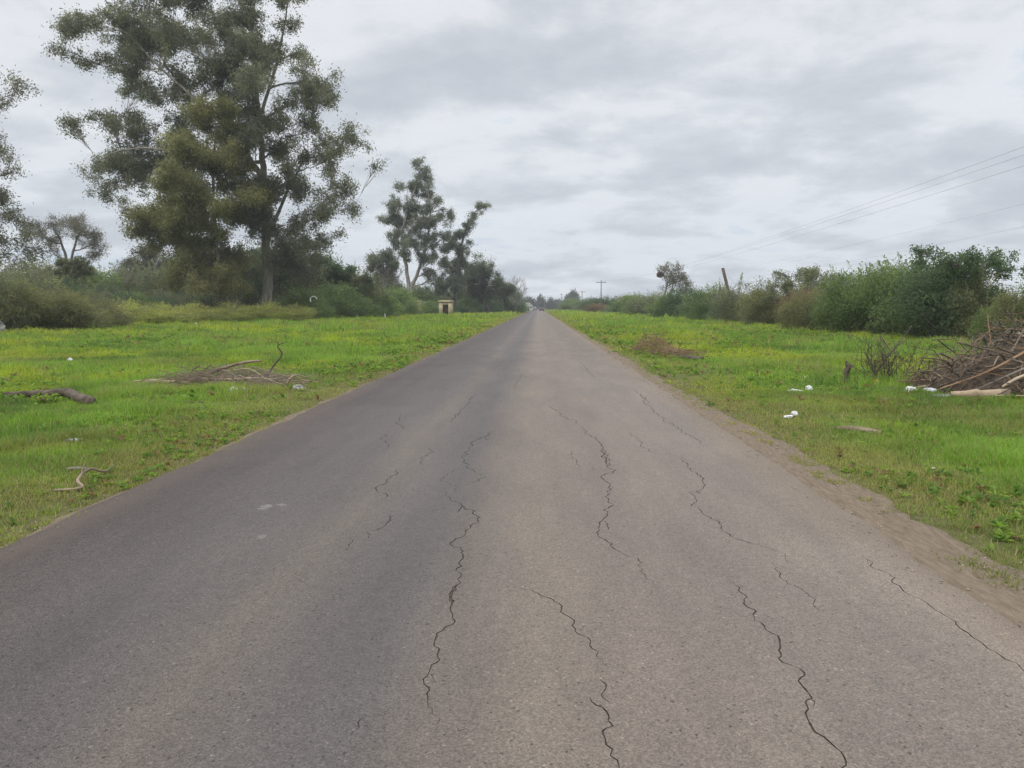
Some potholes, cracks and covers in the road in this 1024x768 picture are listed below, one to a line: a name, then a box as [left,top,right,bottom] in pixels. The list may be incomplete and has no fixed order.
crack [423,496,480,723]
crack [519,587,620,768]
crack [549,406,657,591]
crack [863,556,1024,671]
crack [734,584,847,768]
crack [637,392,815,604]
